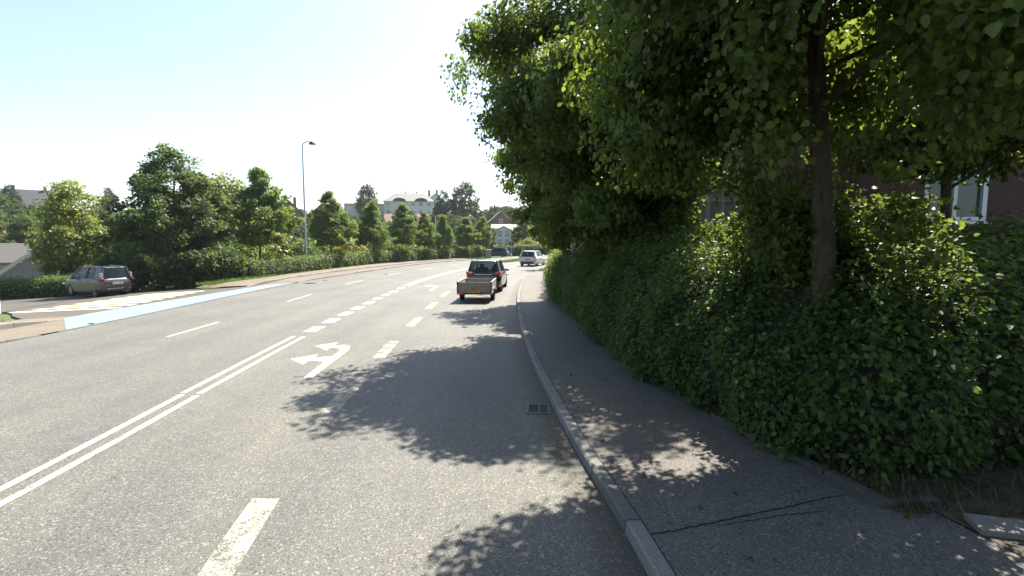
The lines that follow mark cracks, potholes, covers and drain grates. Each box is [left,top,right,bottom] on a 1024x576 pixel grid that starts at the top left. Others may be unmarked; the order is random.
crack [650,494,846,534]
drain grate [526,403,549,414]
